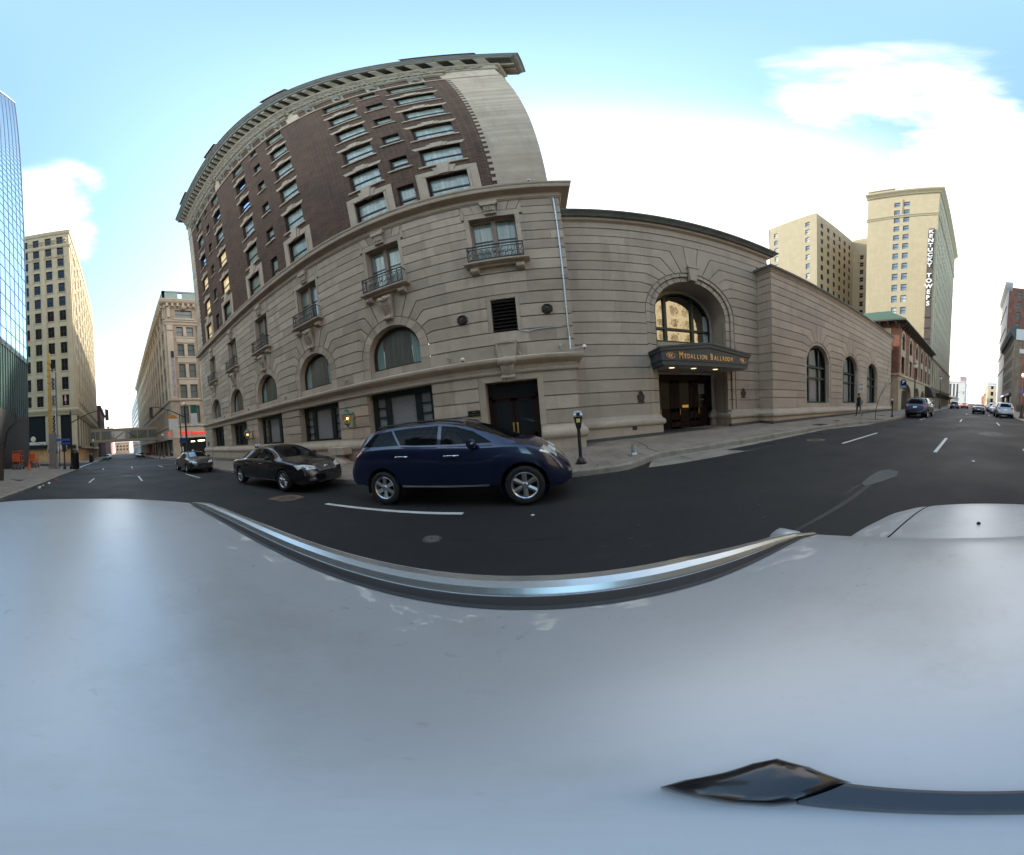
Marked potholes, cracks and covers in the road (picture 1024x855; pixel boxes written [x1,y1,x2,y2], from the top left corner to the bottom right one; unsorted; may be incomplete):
manhole cover [422,535,442,543]
